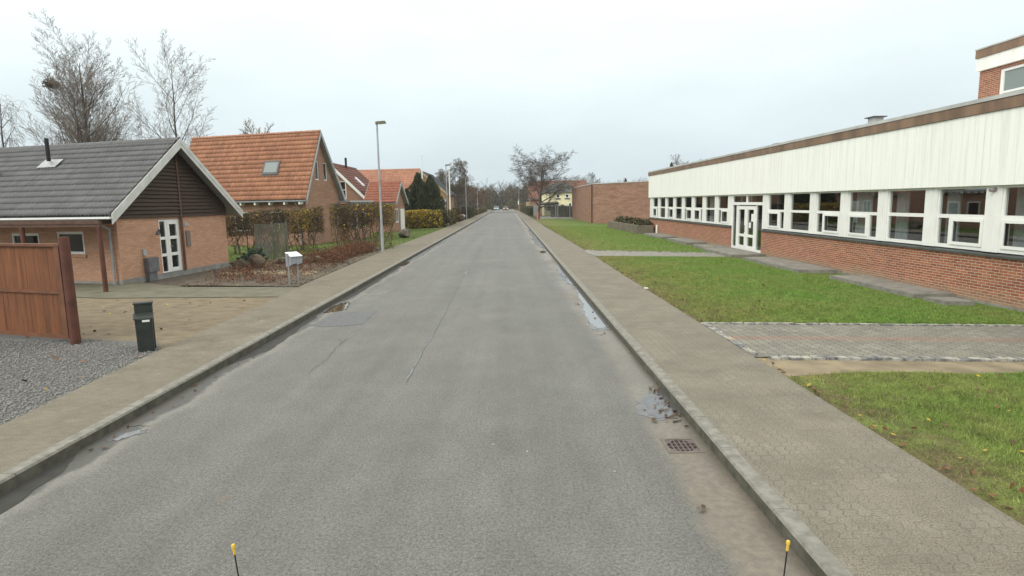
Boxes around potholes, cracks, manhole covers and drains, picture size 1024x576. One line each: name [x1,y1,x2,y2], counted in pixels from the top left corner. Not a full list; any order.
drain grate [660,438,705,454]
crack [407,240,486,382]
